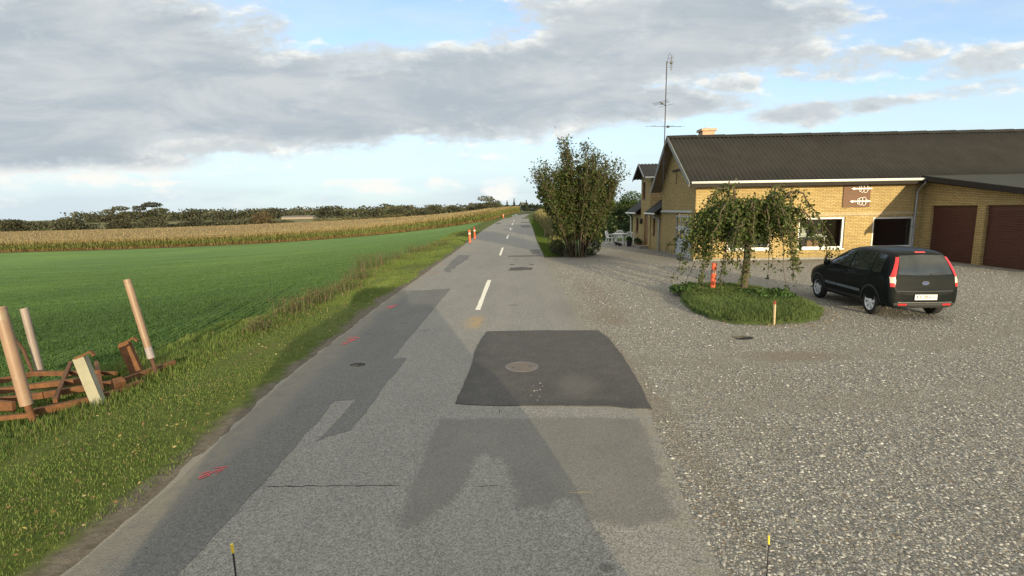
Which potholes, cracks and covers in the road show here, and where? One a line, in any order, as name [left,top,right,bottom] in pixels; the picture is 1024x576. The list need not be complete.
manhole cover [505,361,539,372]
